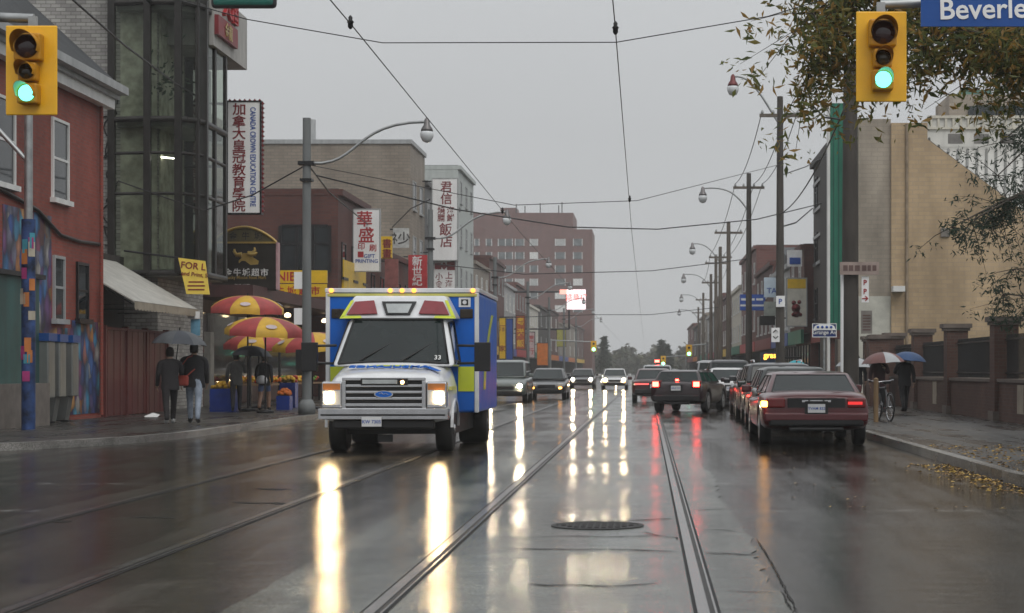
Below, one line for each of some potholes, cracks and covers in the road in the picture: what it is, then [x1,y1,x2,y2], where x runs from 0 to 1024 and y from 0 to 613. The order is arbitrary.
manhole cover [551,521,644,530]
